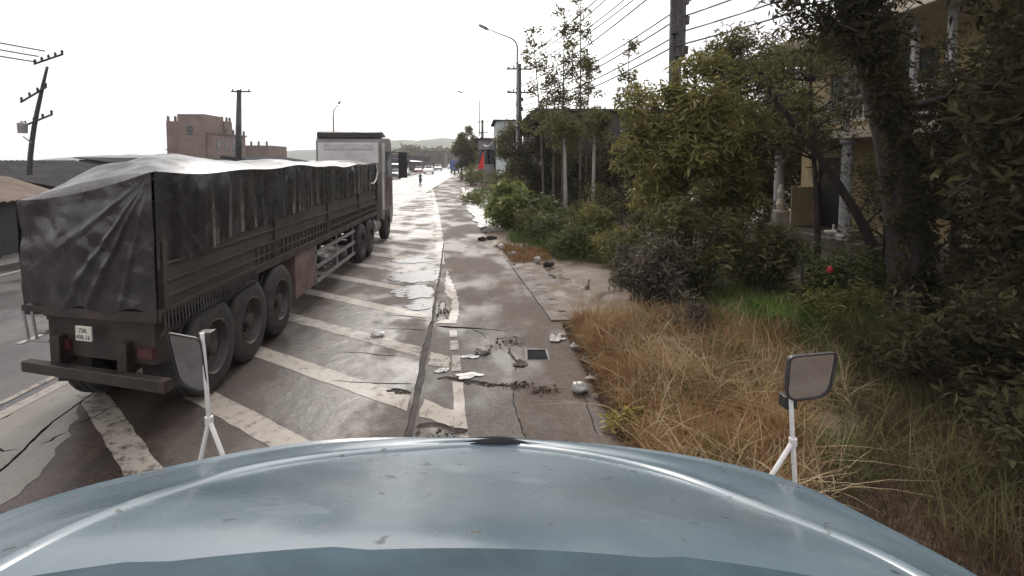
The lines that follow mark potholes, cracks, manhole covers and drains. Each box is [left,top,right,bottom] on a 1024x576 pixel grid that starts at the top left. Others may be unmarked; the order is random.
crack [0,393,104,472]
crack [583,393,598,437]
crack [383,314,517,370]
pothole [415,422,468,437]
pothole [436,301,449,320]
crack [512,391,526,439]
